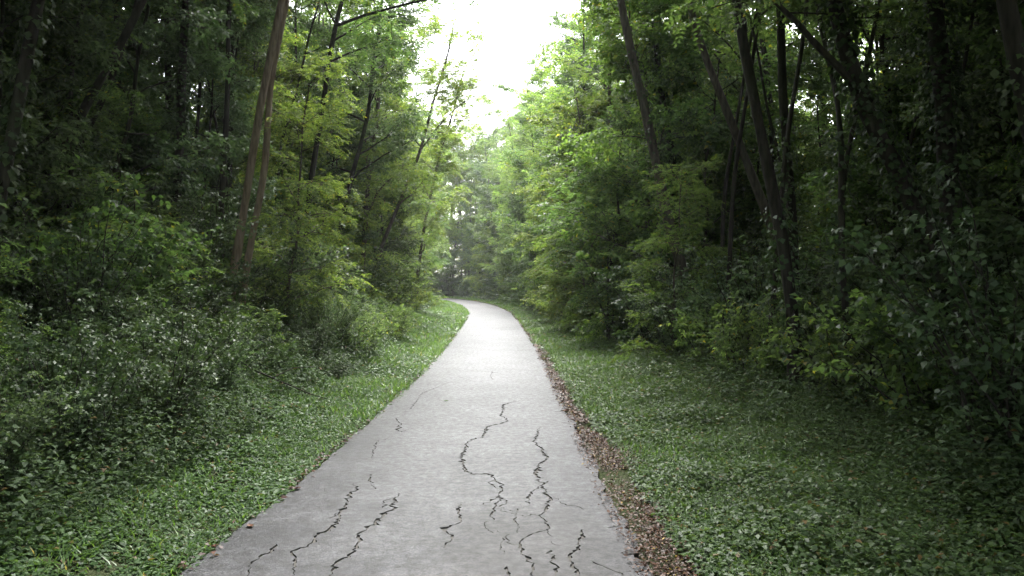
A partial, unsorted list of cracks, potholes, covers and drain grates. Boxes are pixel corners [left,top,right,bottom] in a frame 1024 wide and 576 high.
crack [459,402,633,576]
crack [441,506,462,547]
crack [248,474,399,576]
